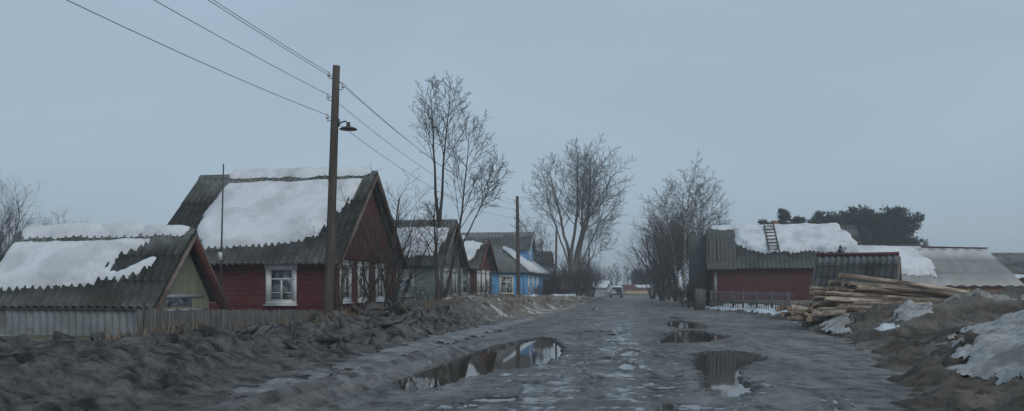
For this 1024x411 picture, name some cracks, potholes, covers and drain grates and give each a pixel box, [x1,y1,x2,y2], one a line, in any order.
pothole [654,330,736,344]
pothole [388,336,571,392]
pothole [662,320,710,329]
pothole [683,350,775,397]
